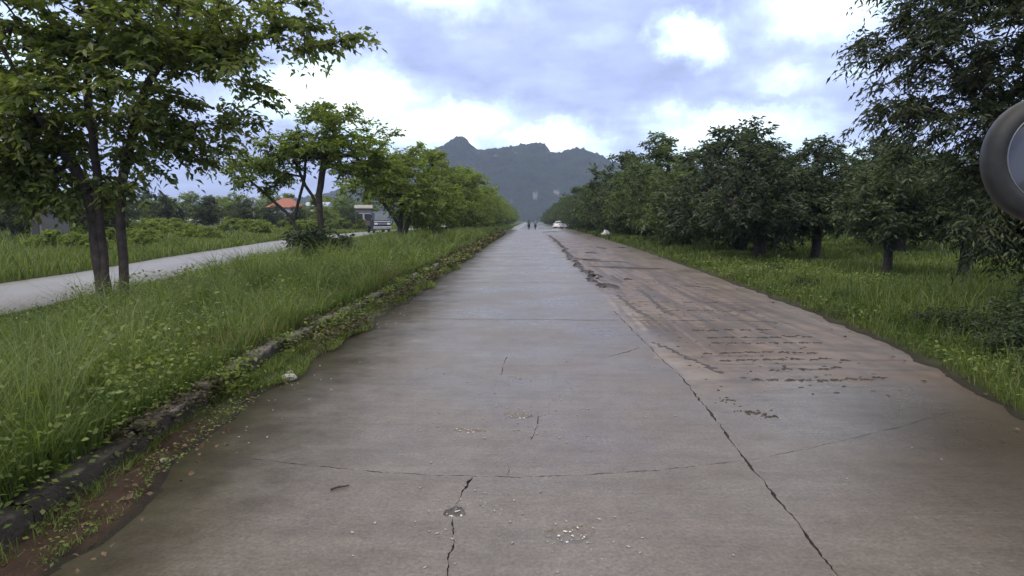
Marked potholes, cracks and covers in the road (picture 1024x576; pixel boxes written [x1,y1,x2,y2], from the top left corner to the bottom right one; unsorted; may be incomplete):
pothole [443,506,466,517]
crack [253,311,948,576]
